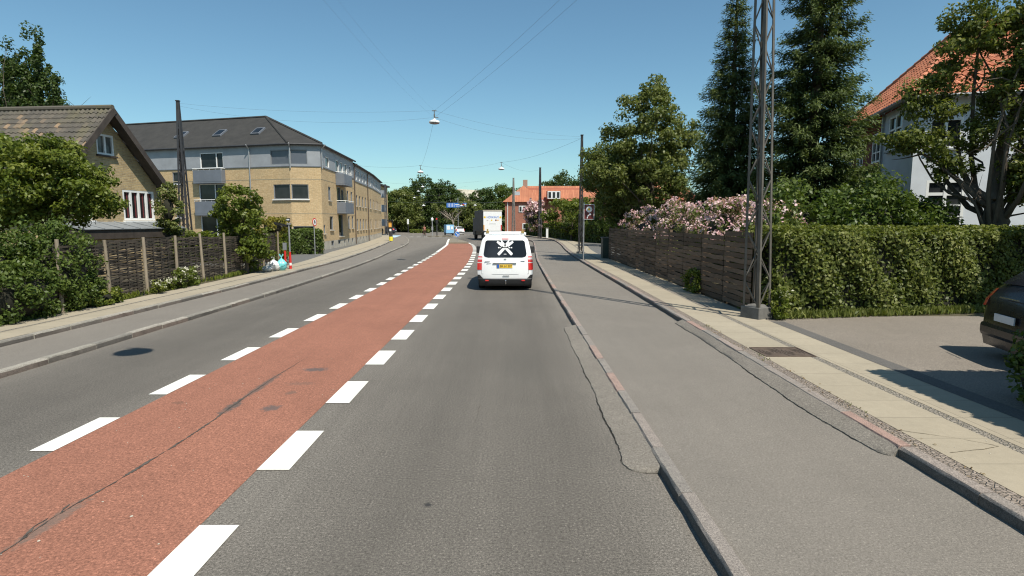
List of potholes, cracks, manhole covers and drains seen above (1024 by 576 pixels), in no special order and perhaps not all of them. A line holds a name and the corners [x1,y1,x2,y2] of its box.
manhole cover [749,347,816,357]
crack [0,362,299,554]
